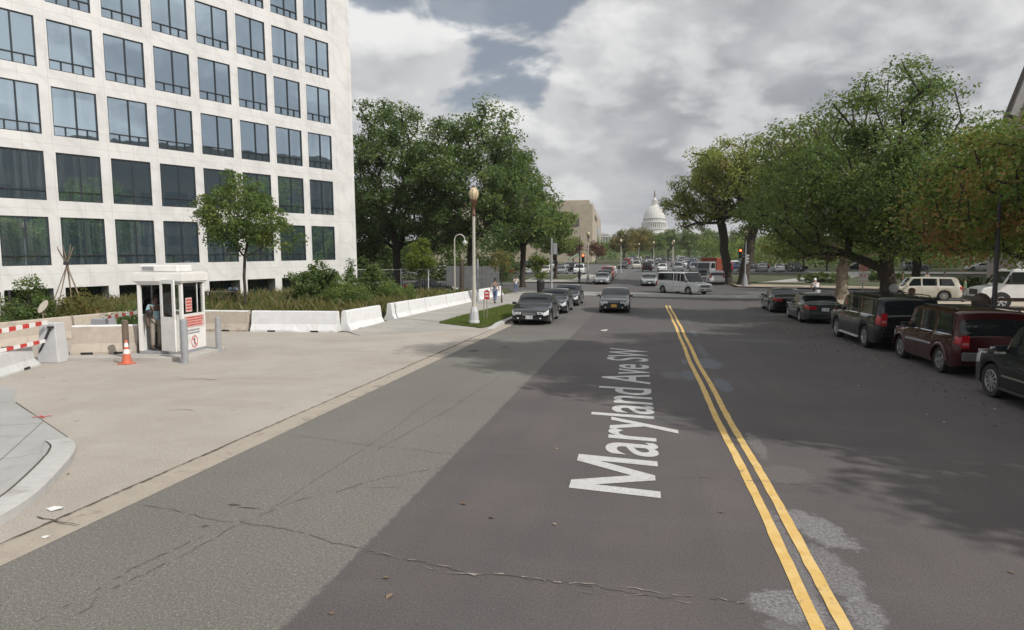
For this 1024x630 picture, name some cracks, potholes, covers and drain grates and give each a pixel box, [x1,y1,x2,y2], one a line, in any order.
crack [39,362,753,620]
